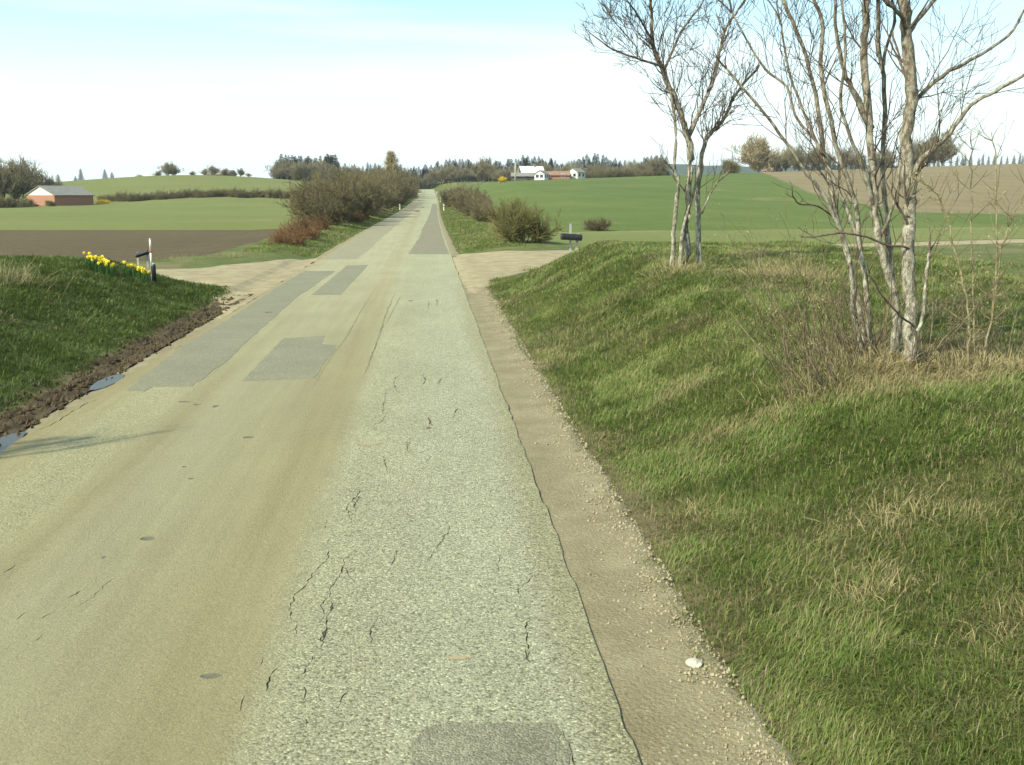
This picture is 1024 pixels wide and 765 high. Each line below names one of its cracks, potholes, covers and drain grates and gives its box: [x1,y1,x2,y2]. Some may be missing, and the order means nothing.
crack [518,565,561,665]
crack [290,526,355,699]
